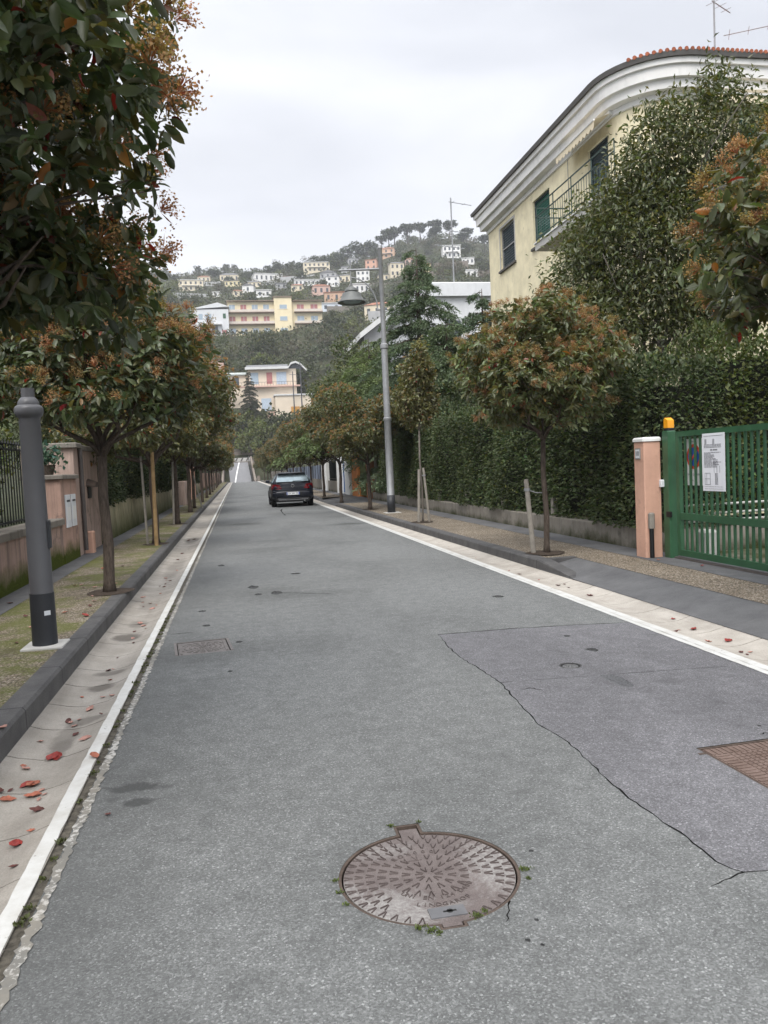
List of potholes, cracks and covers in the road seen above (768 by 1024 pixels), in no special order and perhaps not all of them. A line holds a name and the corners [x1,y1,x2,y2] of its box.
manhole cover [174,638,234,656]
manhole cover [338,823,521,930]
manhole cover [697,739,768,789]
crack [438,622,768,886]
